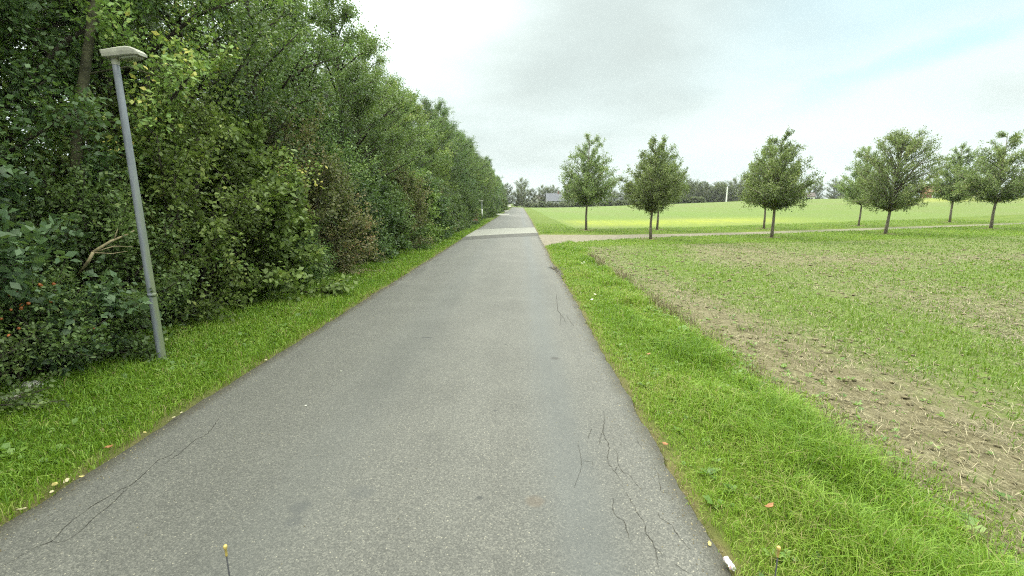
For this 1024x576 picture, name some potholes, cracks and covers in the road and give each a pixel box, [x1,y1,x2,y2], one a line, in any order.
crack [612,496,690,573]
crack [574,415,641,487]
crack [8,422,216,563]
